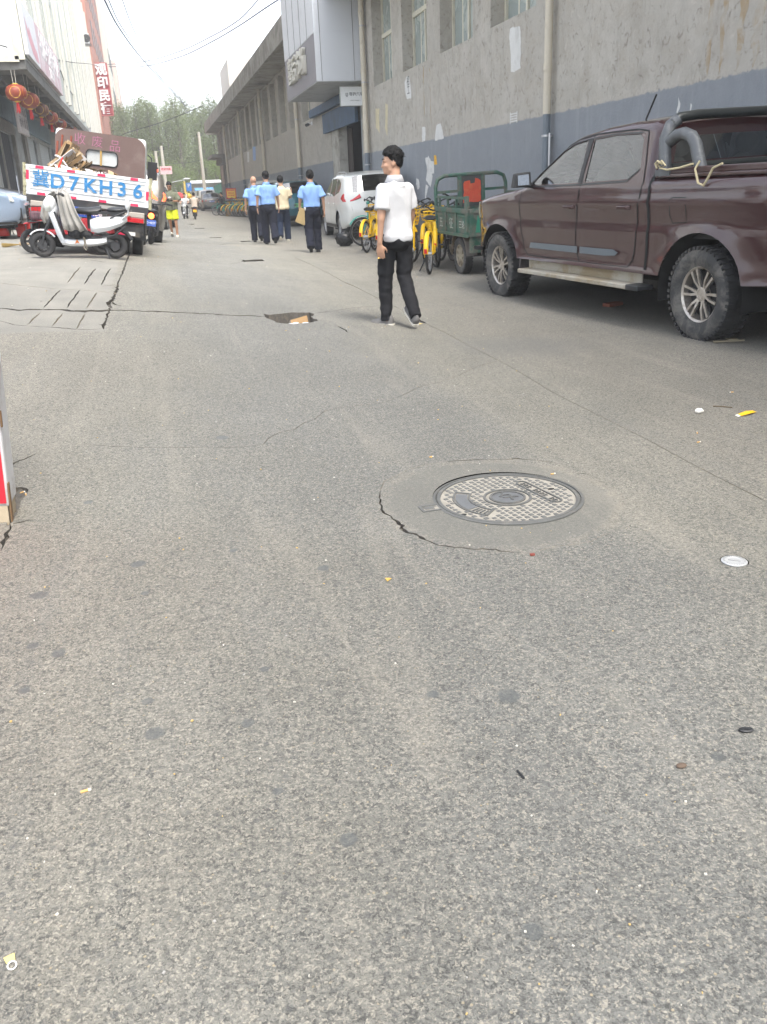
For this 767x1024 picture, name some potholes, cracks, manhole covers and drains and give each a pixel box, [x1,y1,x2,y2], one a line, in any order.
pothole [264,312,318,324]
crack [2,252,130,330]
crack [88,363,488,448]
crack [379,458,610,554]
manhole cover [418,473,584,526]
crack [0,520,29,550]
